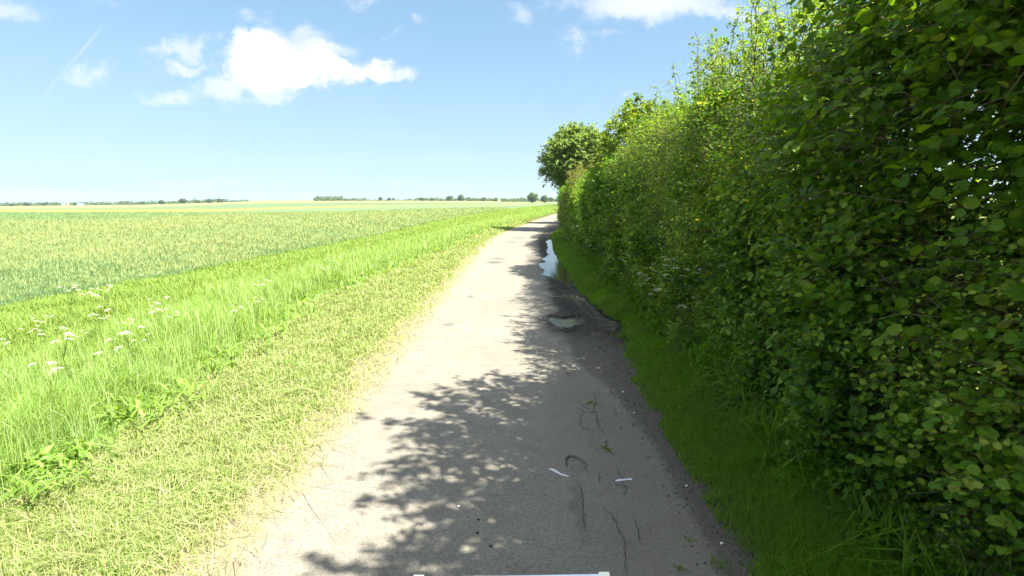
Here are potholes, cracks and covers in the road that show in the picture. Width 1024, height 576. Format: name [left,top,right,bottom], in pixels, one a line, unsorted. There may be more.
pothole [544,313,588,336]
crack [578,392,650,575]
